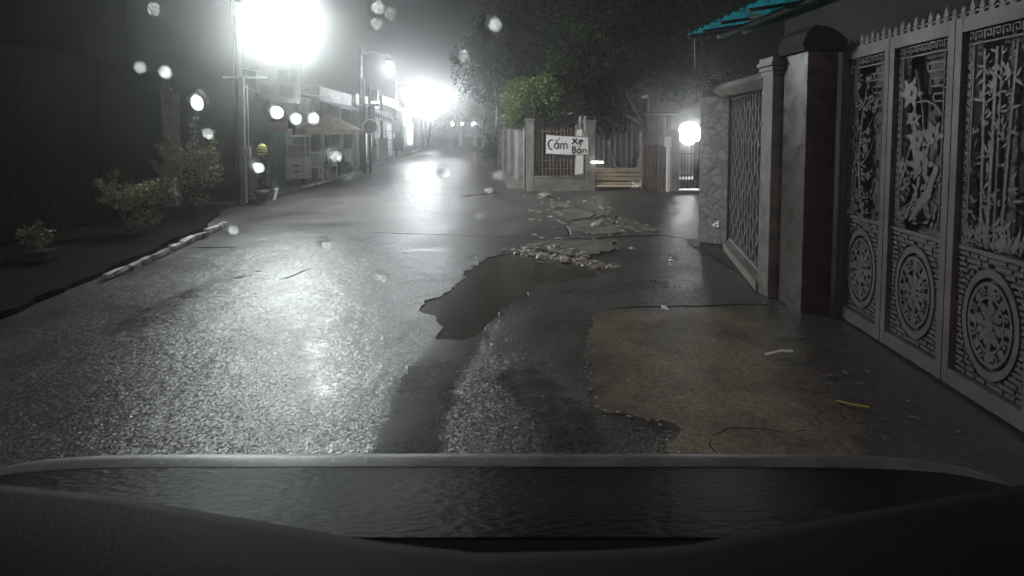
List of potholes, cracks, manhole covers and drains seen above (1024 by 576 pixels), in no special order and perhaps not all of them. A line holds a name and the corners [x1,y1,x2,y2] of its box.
pothole [418,253,599,341]
crack [548,197,679,240]
crack [709,427,803,454]
